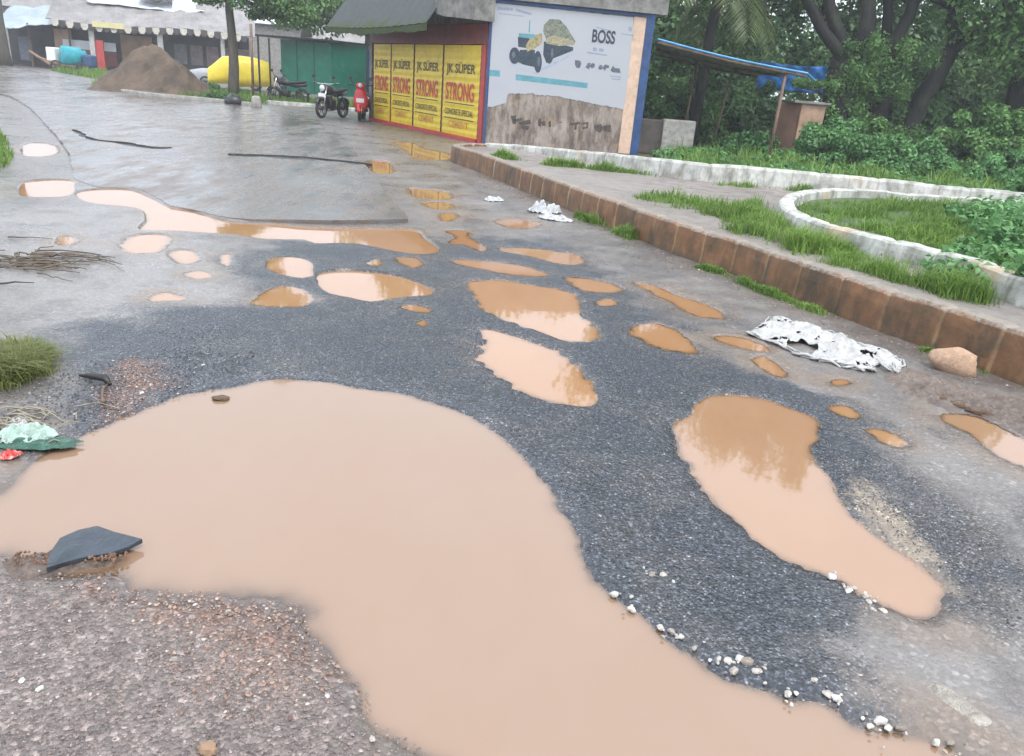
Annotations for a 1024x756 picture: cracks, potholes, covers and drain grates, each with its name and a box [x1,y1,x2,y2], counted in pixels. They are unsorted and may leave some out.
pothole [469,325,612,409]
pothole [315,268,435,302]
pothole [242,283,320,309]
pothole [460,277,606,343]
pothole [404,187,456,200]
pothole [0,370,1001,756]
pothole [709,333,775,353]
pothole [925,406,1024,472]
pothole [620,320,710,356]
pothole [74,188,441,254]
pothole [264,256,315,278]
pothole [17,178,77,197]
